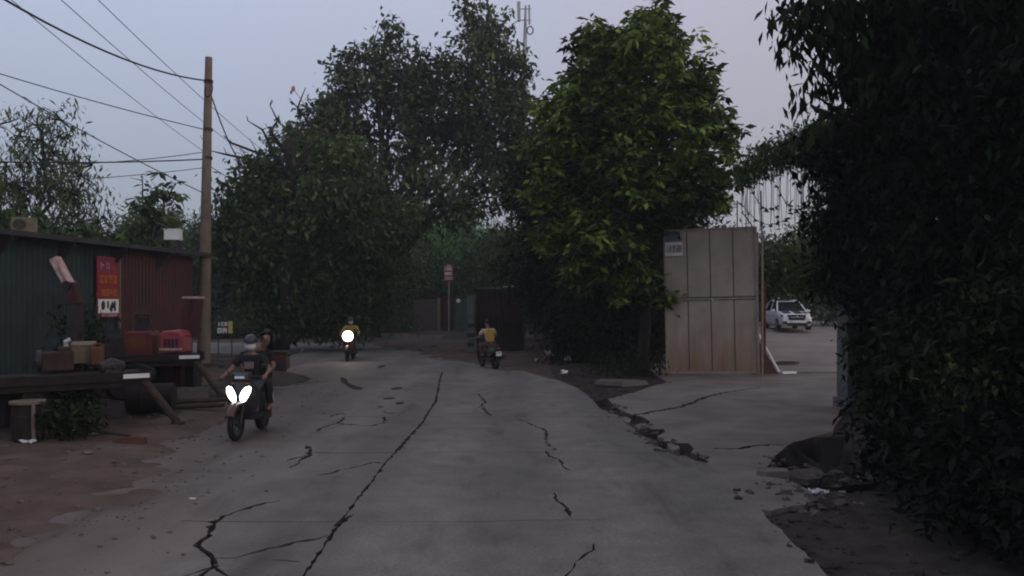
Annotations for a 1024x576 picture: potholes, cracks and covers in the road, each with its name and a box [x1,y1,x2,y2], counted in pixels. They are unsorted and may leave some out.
pothole [767,437,886,493]
crack [553,494,572,517]
crack [477,394,491,416]
crack [594,388,778,463]
crack [519,420,569,470]
crack [564,543,595,576]
crack [185,372,443,576]
